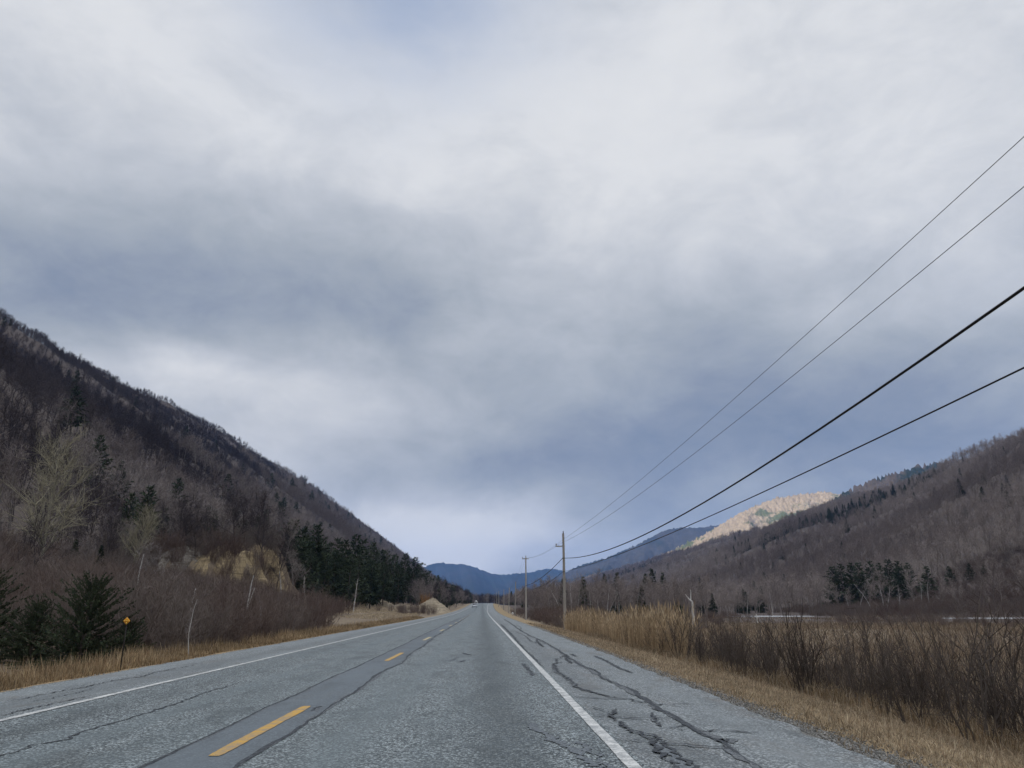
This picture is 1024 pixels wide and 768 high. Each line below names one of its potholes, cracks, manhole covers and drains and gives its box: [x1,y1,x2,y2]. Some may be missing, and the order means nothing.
crack [1,681,243,755]
crack [500,619,762,768]
crack [4,664,196,715]
